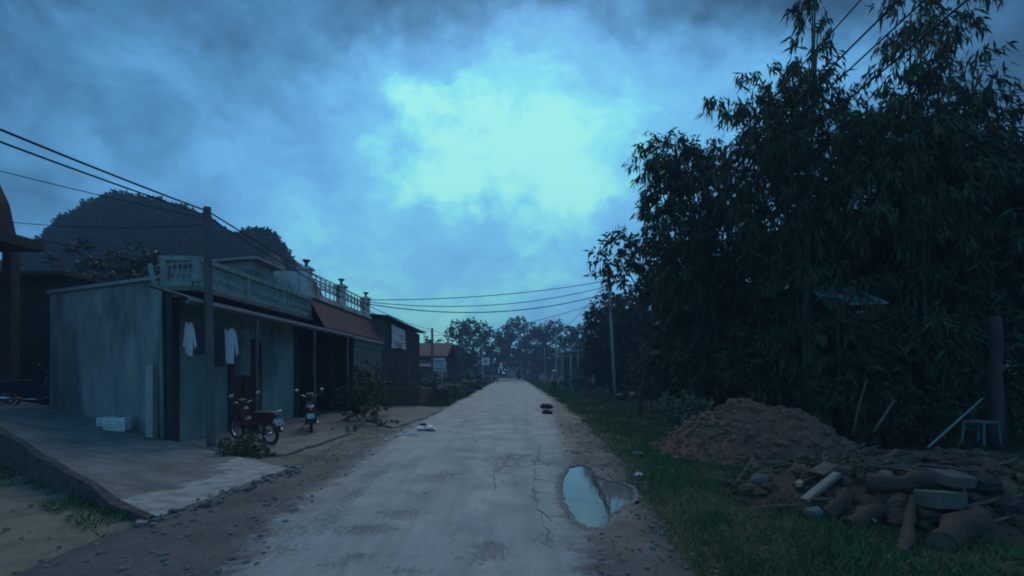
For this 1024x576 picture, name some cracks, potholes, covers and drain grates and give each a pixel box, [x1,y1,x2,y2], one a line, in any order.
crack [461,438,570,539]
pothole [556,464,640,529]
